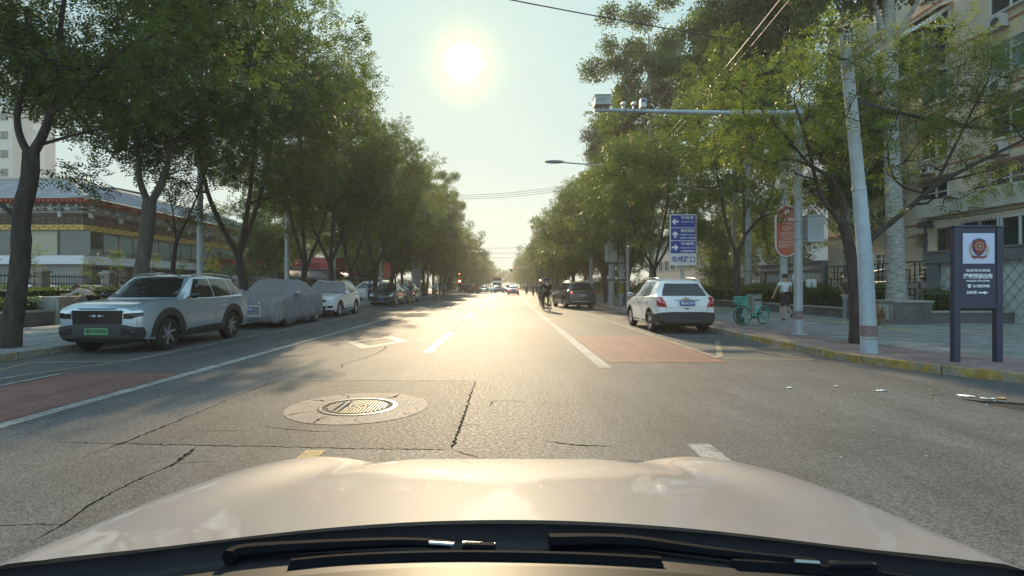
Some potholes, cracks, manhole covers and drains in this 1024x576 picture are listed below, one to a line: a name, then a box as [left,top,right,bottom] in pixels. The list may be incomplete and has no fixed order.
crack [0,346,387,543]
manhole cover [283,393,428,425]
crack [527,438,659,462]
